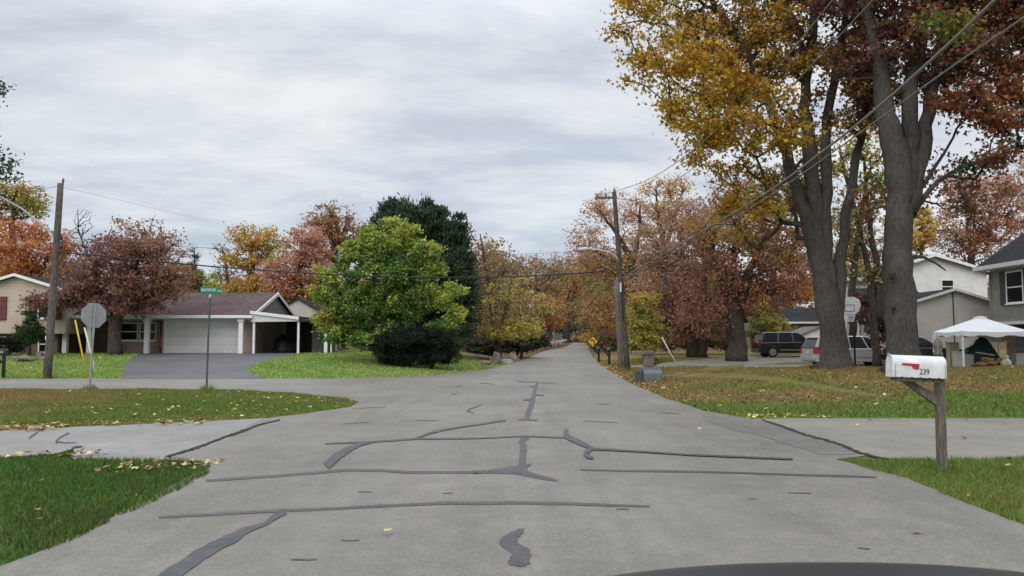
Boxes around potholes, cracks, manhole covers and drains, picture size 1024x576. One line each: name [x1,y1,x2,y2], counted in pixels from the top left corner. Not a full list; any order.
crack [29,432,82,448]
